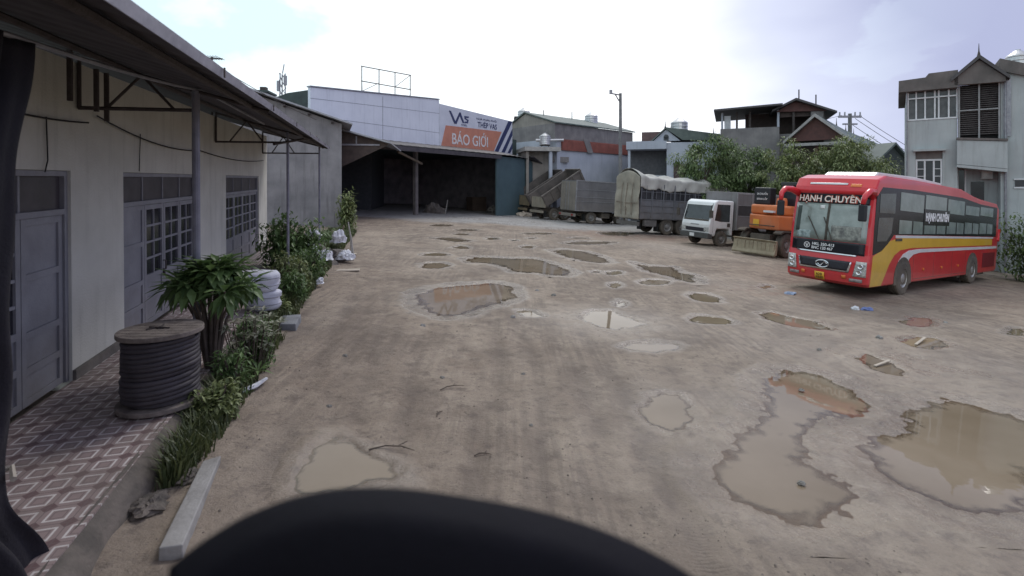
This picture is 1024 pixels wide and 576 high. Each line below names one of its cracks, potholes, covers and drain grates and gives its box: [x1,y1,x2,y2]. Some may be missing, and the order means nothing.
pothole [264,424,430,505]
pothole [890,313,954,330]
pothole [393,280,533,322]
pothole [749,309,846,333]
pothole [660,360,939,559]
pothole [413,261,457,270]
pothole [678,313,745,328]
pothole [543,247,623,265]
pothole [619,386,712,440]
pothole [679,291,732,305]
pothole [886,332,965,353]
pothole [830,385,1024,550]
